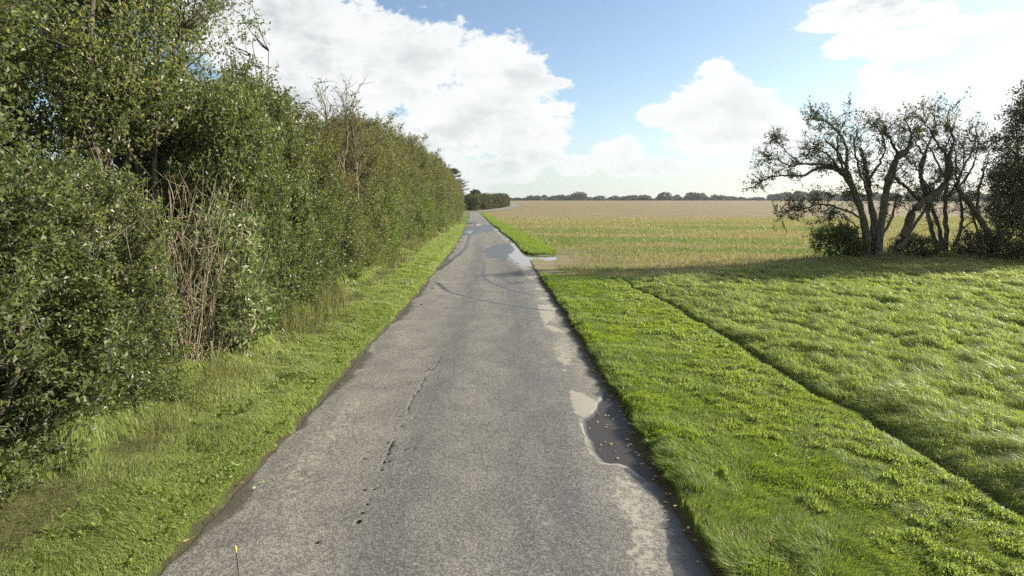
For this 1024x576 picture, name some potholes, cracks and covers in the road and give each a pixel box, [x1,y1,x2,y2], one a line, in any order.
crack [316,361,439,544]
